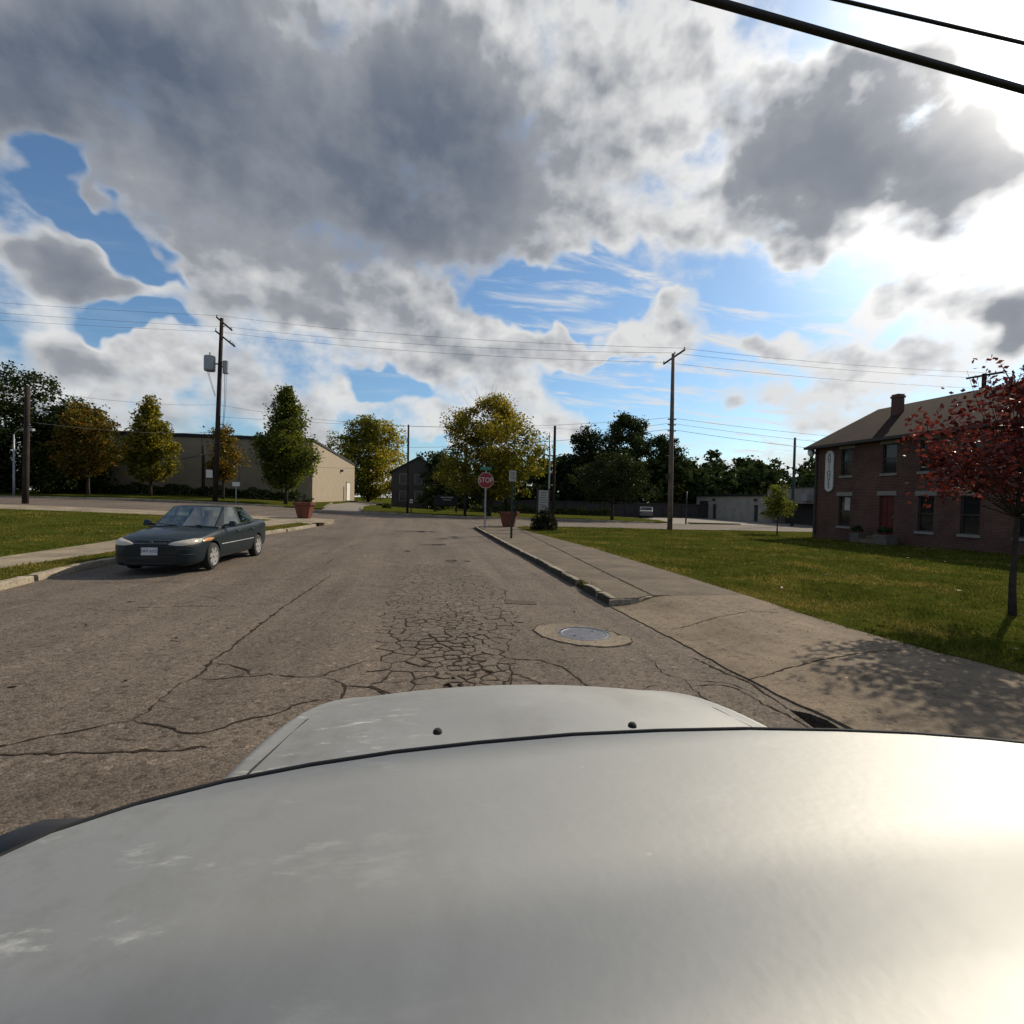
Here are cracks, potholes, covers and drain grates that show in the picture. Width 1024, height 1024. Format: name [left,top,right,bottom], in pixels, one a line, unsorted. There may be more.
crack [0,538,810,746]
manhole cover [532,623,633,648]
